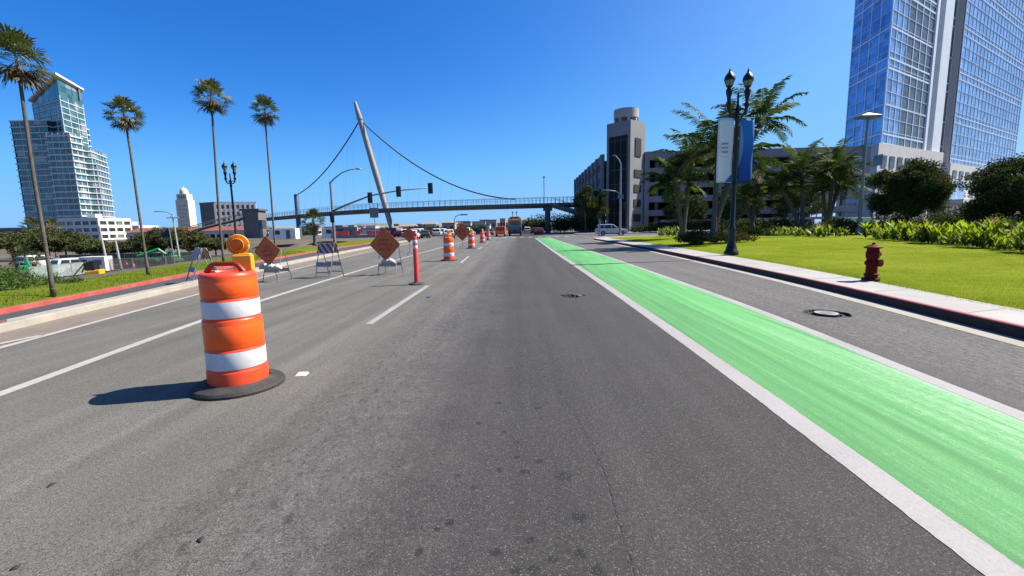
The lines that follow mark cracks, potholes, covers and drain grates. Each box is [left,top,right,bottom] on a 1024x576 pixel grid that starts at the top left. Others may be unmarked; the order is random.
manhole cover [802,309,853,318]
crack [563,398,635,576]
